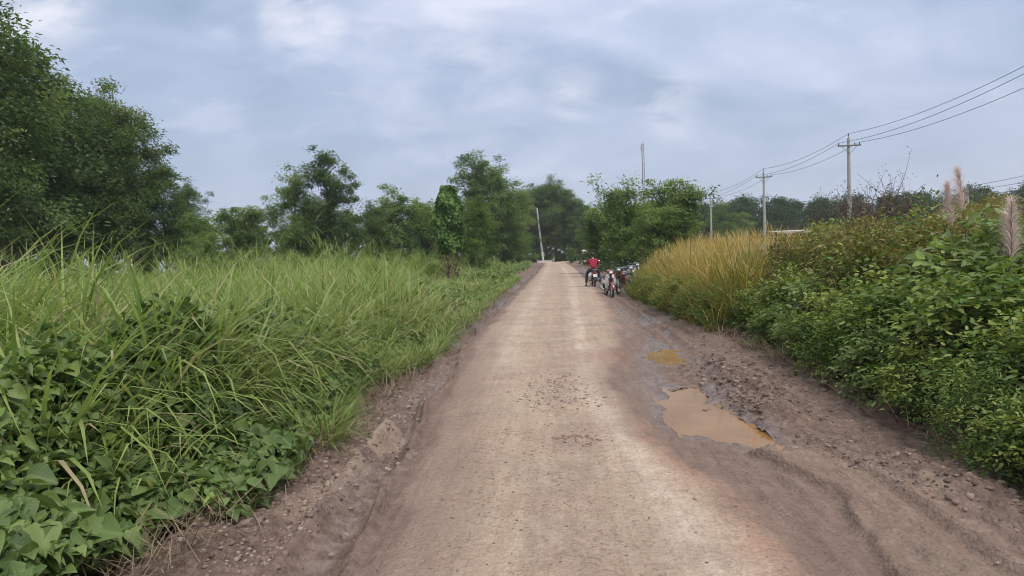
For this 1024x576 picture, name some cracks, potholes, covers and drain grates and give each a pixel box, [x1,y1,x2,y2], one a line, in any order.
pothole [653,385,789,450]
pothole [640,349,688,367]
